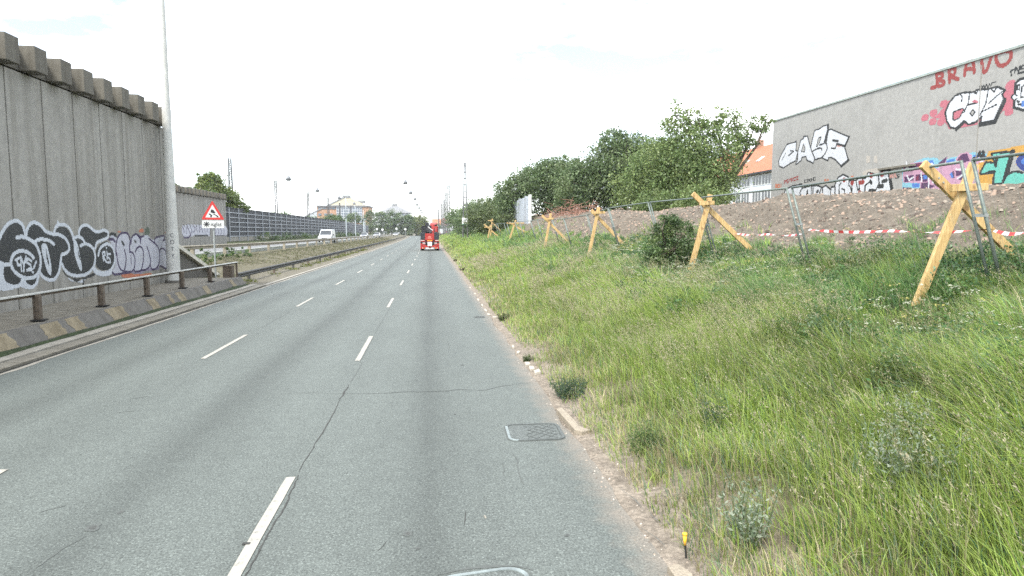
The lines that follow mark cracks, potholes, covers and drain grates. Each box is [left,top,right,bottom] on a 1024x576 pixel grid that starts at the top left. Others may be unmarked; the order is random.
manhole cover [449,567,530,576]
manhole cover [504,423,566,442]
crack [339,384,514,399]
